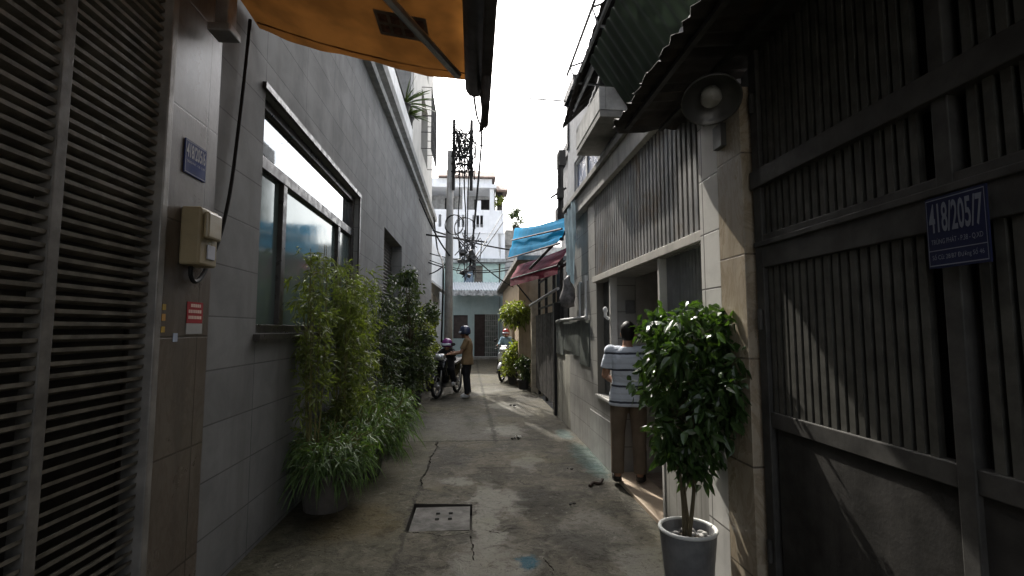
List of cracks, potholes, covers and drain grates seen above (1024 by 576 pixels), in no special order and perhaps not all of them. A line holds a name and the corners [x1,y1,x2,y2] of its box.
manhole cover [405,504,472,532]
crack [407,528,519,560]
crack [420,442,438,486]
